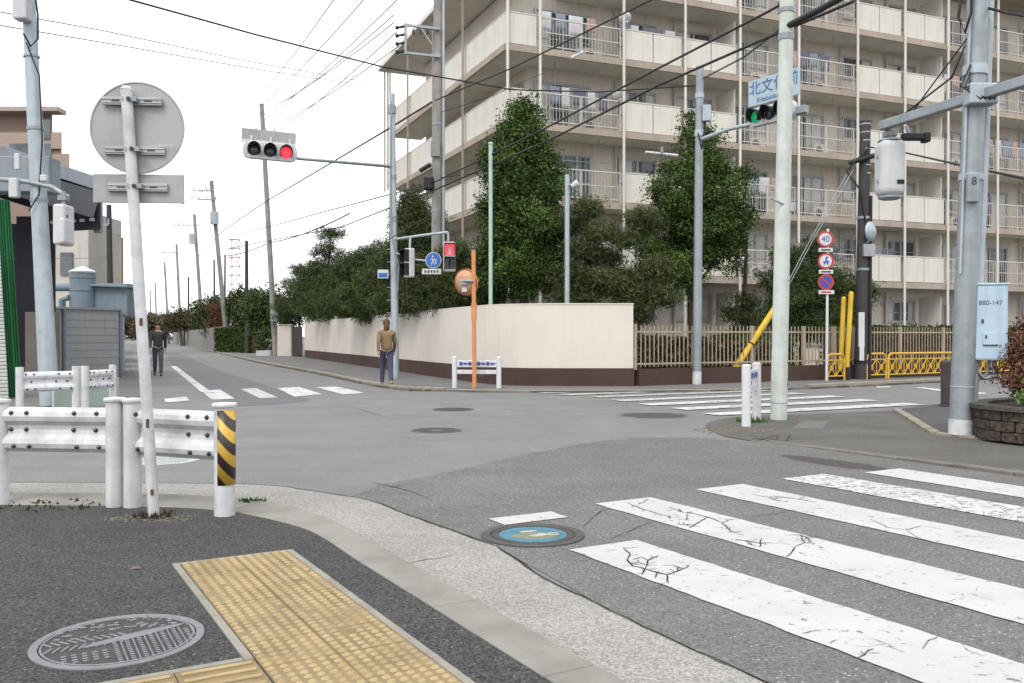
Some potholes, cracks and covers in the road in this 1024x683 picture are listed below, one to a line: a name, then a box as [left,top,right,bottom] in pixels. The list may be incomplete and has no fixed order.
crack [614,494,816,585]
manhole cover [27,614,205,671]
manhole cover [481,523,584,548]
